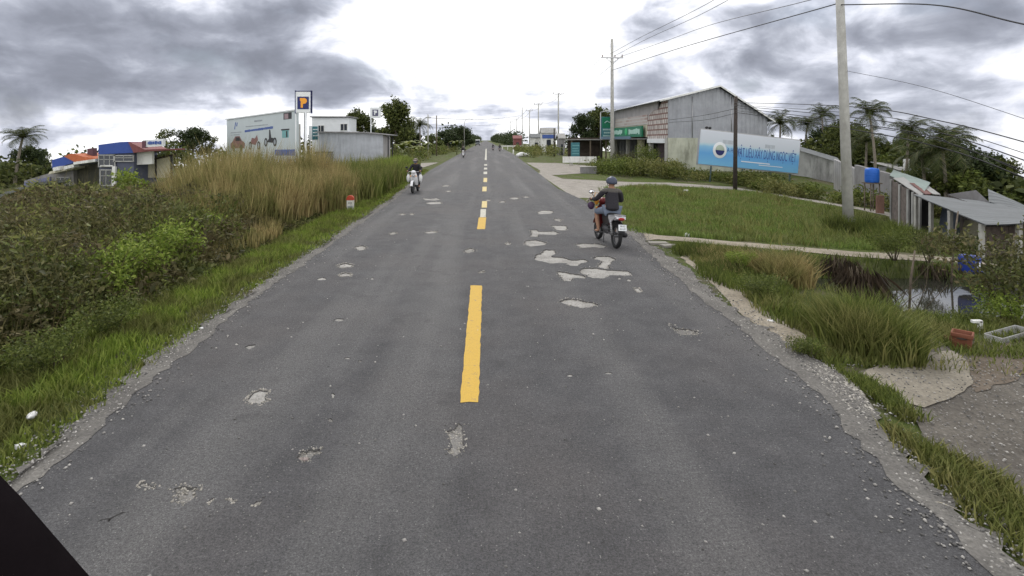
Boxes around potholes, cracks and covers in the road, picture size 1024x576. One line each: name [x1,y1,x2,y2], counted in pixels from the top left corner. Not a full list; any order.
pothole [579,267,632,278]
pothole [243,388,271,406]
pothole [558,297,601,309]
pothole [444,423,468,458]
pothole [591,255,615,269]
pothole [296,446,323,462]
pothole [529,229,558,237]
pothole [534,249,589,266]
pothole [668,324,702,337]
pothole [168,483,203,506]
pothole [136,480,161,491]
